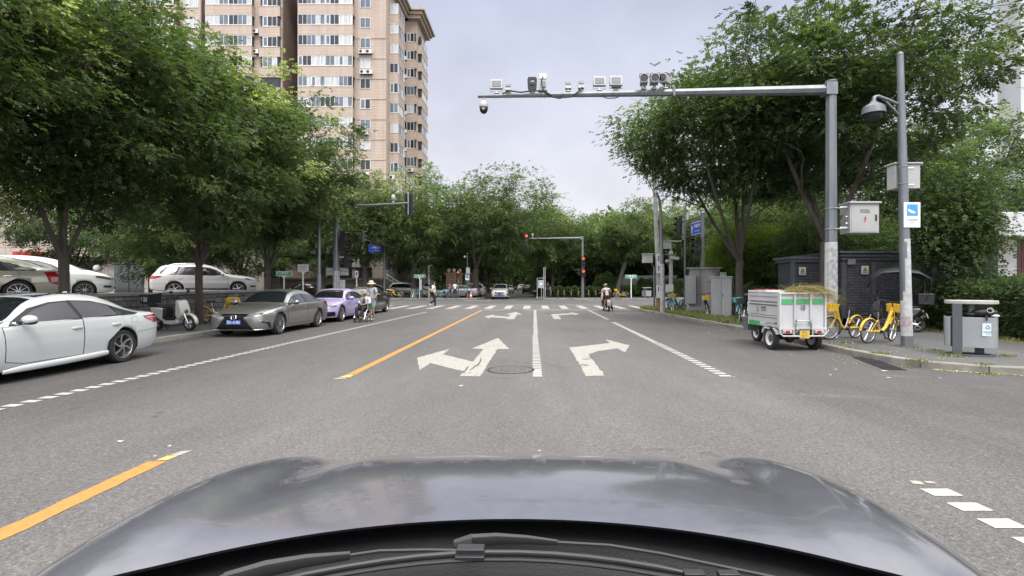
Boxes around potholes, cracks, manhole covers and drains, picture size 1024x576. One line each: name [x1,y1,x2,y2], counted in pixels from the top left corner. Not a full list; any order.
drain grate [853,357,907,371]
manhole cover [487,366,535,374]
